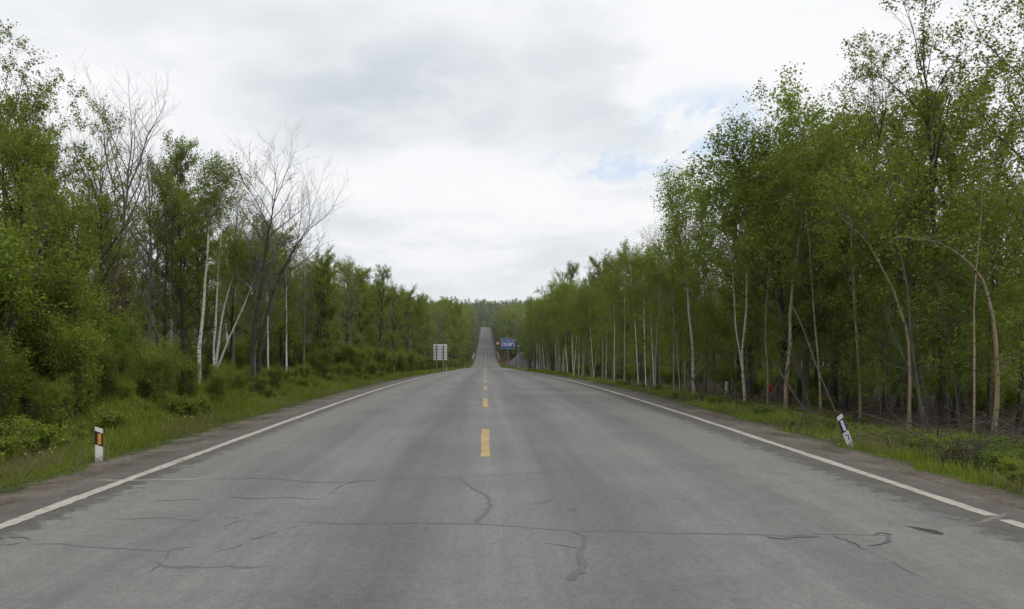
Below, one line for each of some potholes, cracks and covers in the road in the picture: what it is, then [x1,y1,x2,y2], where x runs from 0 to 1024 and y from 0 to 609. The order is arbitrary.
crack [108,472,552,551]
crack [47,543,186,558]
